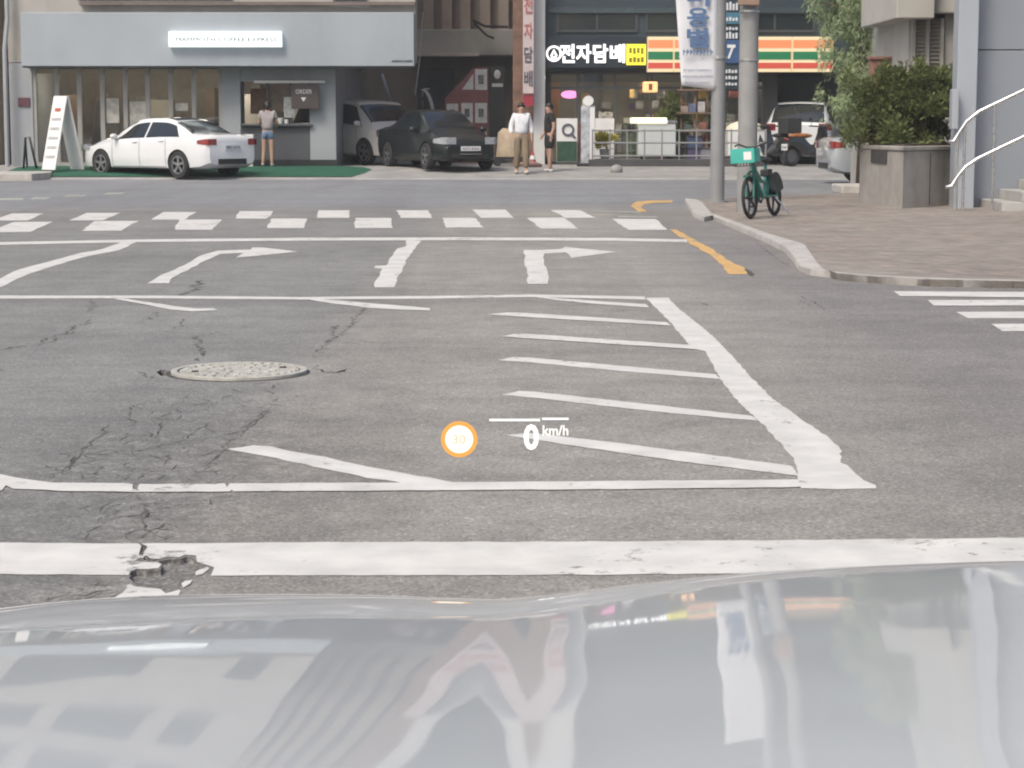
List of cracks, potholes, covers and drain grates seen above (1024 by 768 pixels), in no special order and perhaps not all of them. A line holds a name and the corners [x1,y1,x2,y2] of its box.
crack [141,312,213,361]
manhole cover [166,362,310,382]
crack [80,493,233,559]
crack [1,300,96,350]
pothole [129,557,199,592]
crack [45,382,297,481]
